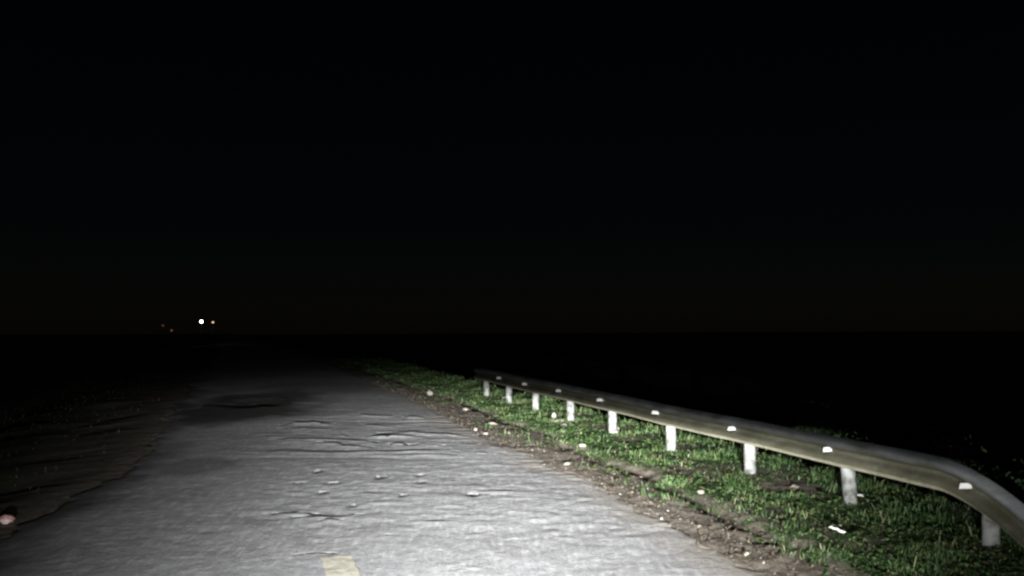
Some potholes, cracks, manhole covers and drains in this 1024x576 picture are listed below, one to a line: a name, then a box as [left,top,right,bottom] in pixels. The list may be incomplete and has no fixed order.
crack [270,415,504,453]
